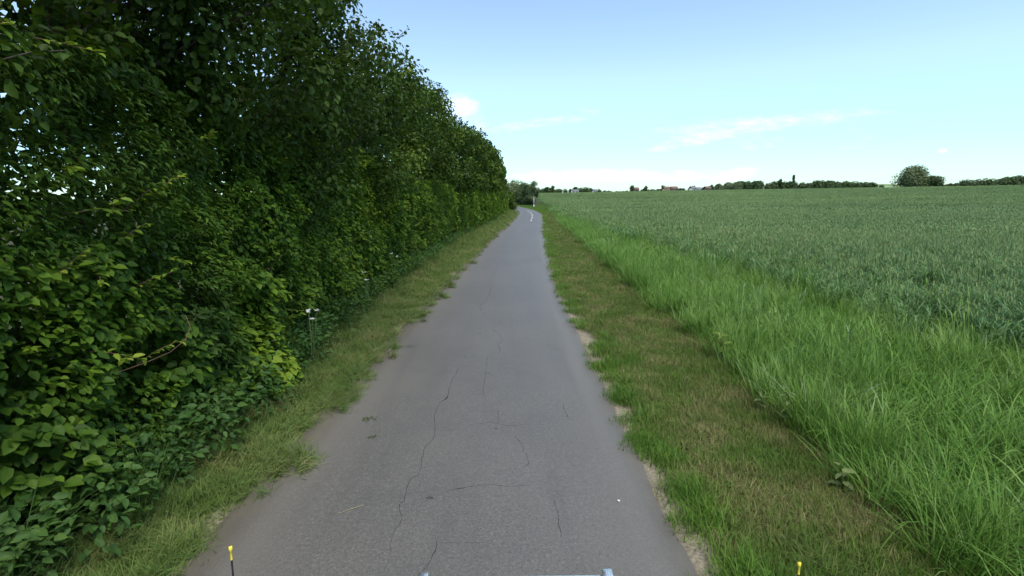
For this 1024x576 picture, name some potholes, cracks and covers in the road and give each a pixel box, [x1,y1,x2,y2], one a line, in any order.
crack [384,358,531,570]
